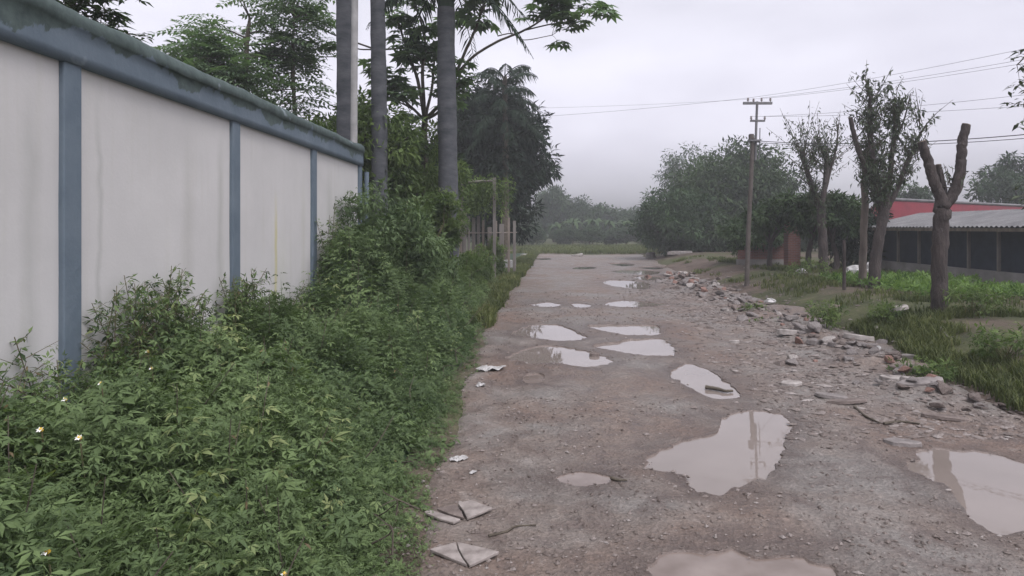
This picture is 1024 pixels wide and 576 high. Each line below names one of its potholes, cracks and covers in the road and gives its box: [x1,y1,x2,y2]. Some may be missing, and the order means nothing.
pothole [670,363,741,399]
pothole [603,280,651,289]
pothole [587,324,661,335]
pothole [646,546,839,576]
pothole [906,448,1024,535]
pothole [592,338,676,356]
pothole [556,471,611,486]
pothole [644,410,794,496]
pothole [512,324,588,341]
pothole [523,372,545,383]
pothole [505,345,614,367]
